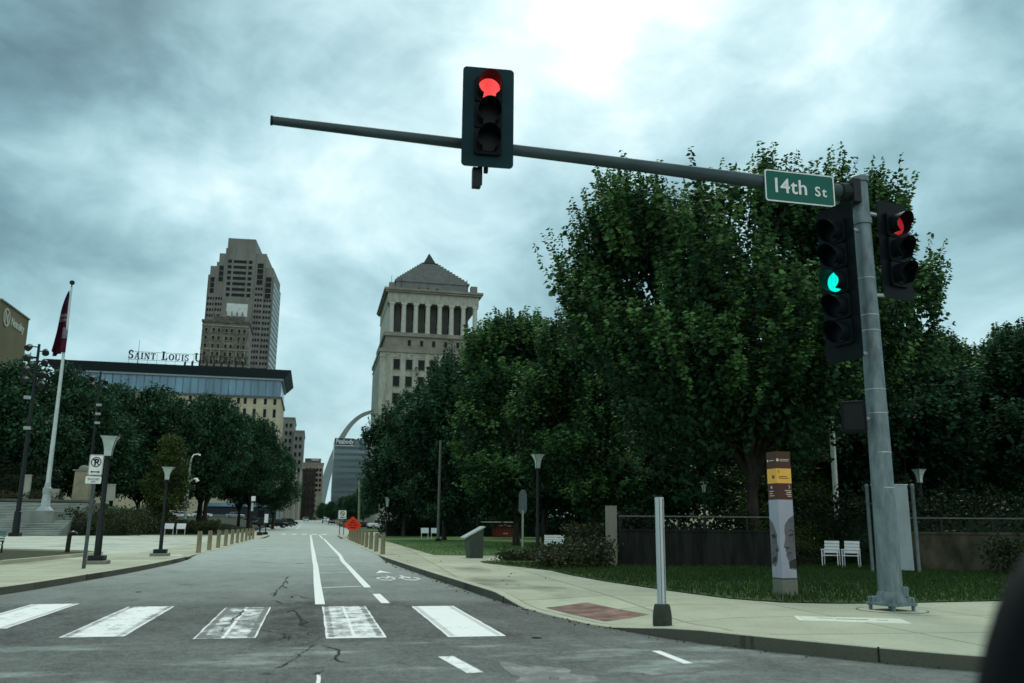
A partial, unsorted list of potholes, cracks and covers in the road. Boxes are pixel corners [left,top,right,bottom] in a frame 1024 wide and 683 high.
crack [264,562,348,675]
